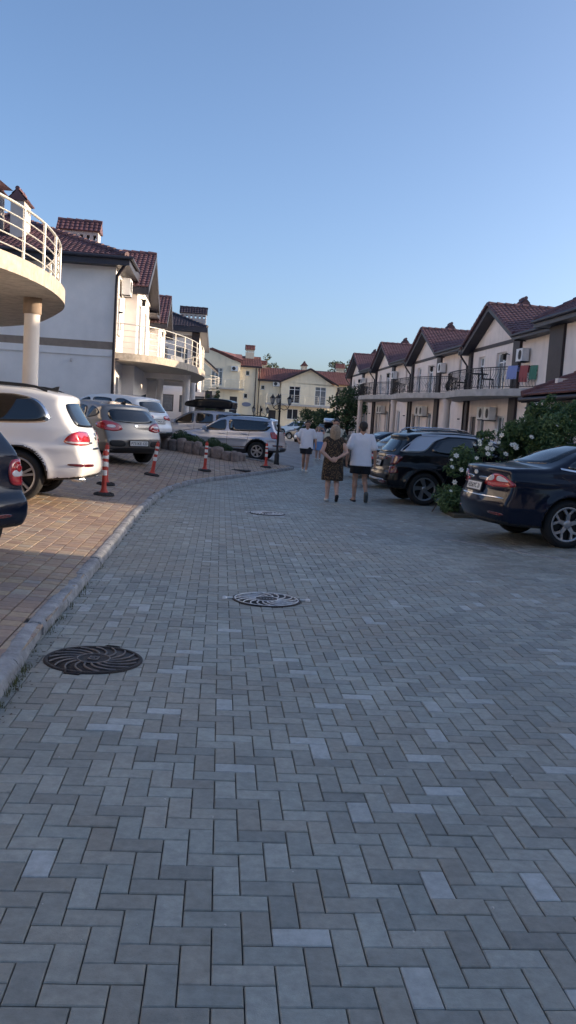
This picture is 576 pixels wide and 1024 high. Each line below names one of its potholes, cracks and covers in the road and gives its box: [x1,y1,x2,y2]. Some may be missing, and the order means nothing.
manhole cover [43,645,143,675]
manhole cover [222,592,310,608]
